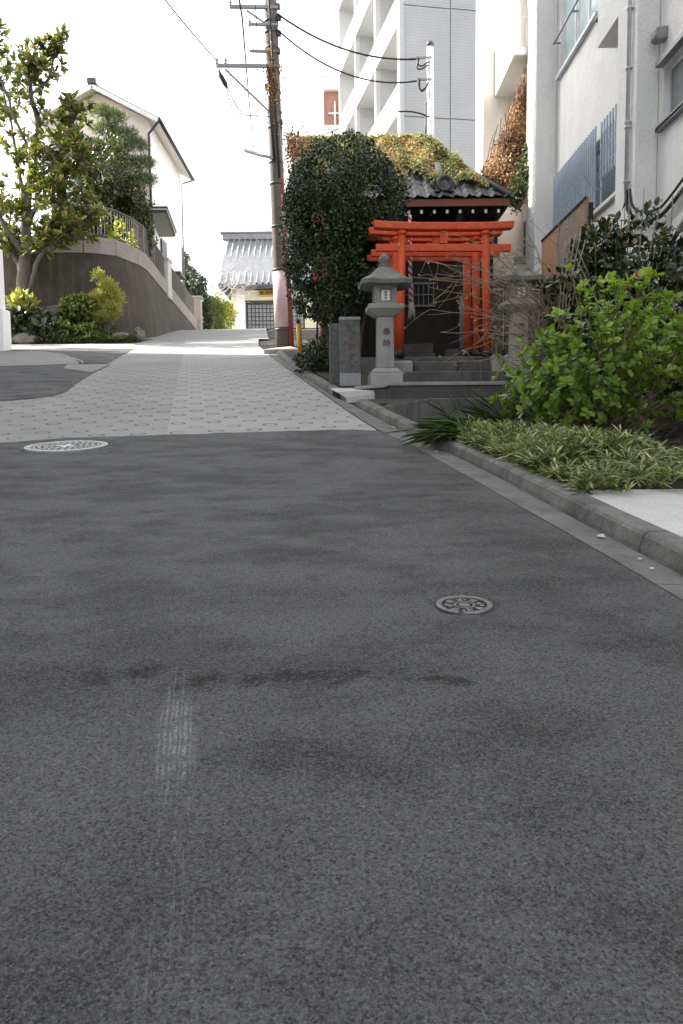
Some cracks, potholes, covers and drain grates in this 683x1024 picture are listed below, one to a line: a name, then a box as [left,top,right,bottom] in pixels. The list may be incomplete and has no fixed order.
manhole cover [24,440,108,452]
manhole cover [436,595,493,615]
